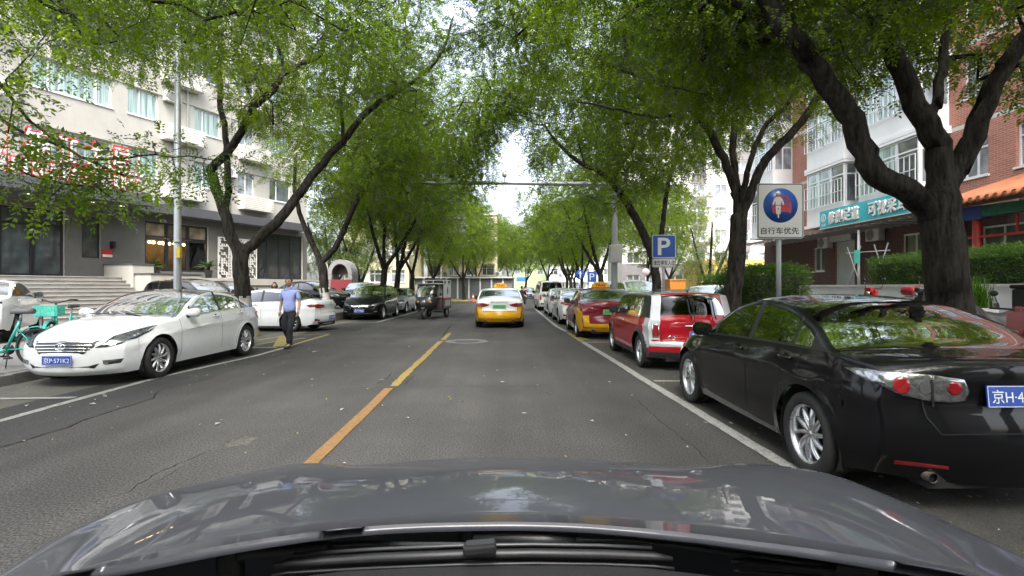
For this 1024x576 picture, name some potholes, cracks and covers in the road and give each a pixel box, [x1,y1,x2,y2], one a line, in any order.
crack [86,451,208,505]
